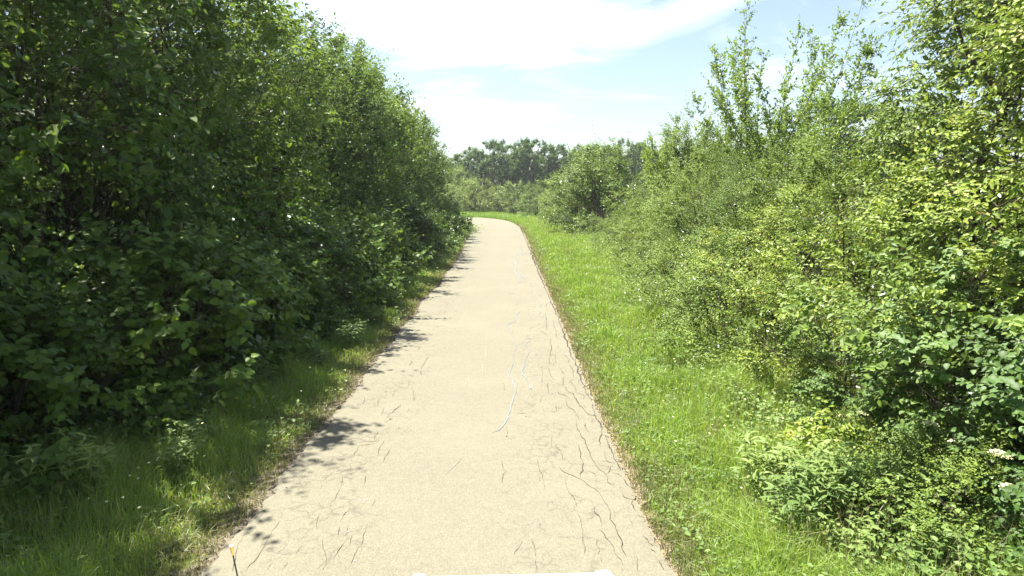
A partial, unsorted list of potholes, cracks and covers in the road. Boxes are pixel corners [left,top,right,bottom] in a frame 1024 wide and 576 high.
crack [521,229,663,571]
crack [354,348,429,459]
